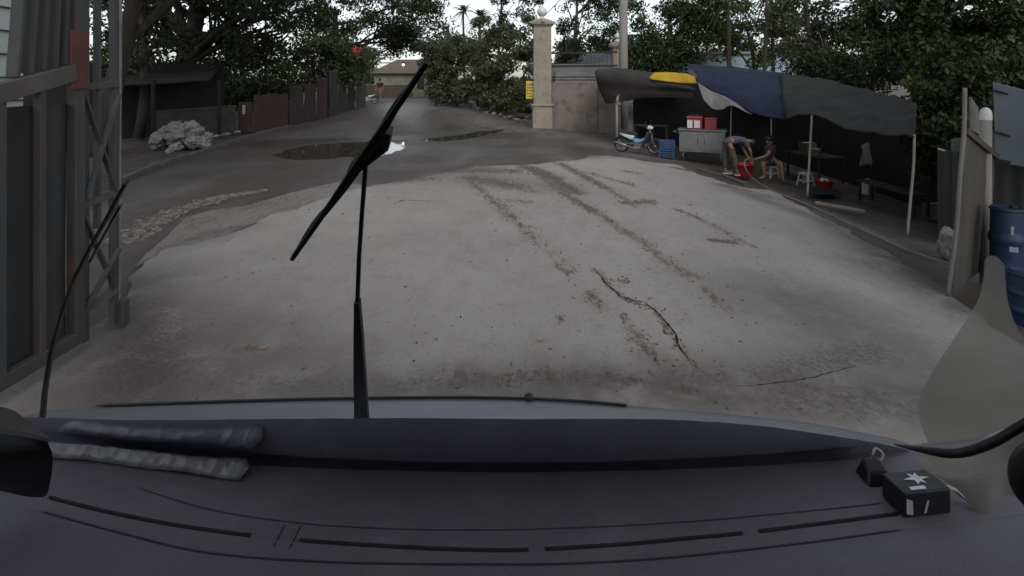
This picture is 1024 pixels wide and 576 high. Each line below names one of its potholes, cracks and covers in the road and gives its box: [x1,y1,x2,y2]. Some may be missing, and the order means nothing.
crack [732,366,853,387]
crack [598,274,697,368]
